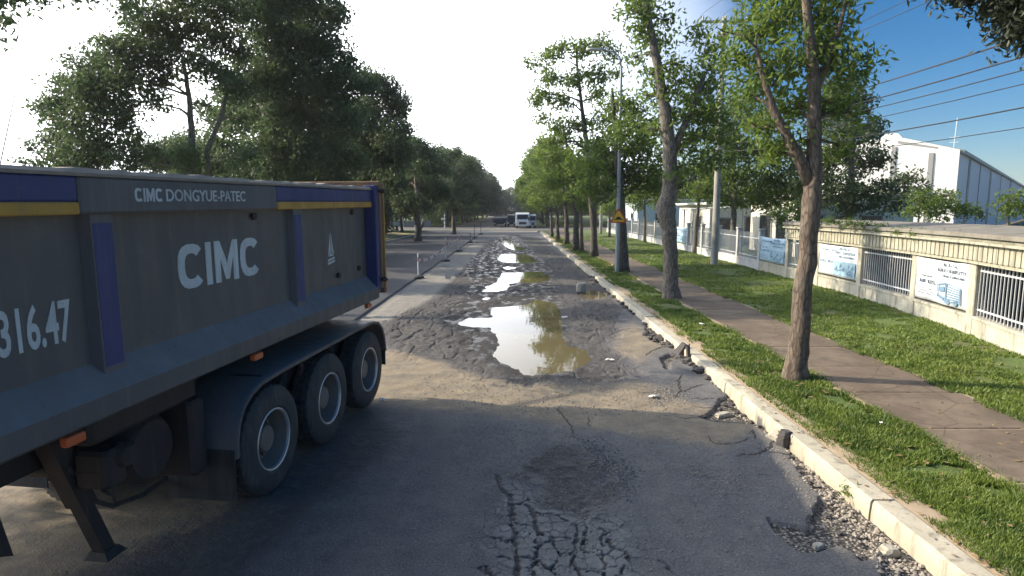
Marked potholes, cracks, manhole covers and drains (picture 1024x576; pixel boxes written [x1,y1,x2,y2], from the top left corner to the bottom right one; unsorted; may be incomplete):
crack [708,430,789,456]
crack [495,465,630,576]
pothole [454,298,597,377]
crack [646,346,710,419]
pothole [495,253,539,263]
pothole [501,238,527,250]
pothole [766,496,881,561]
pothole [660,353,675,370]
crack [555,407,590,436]
